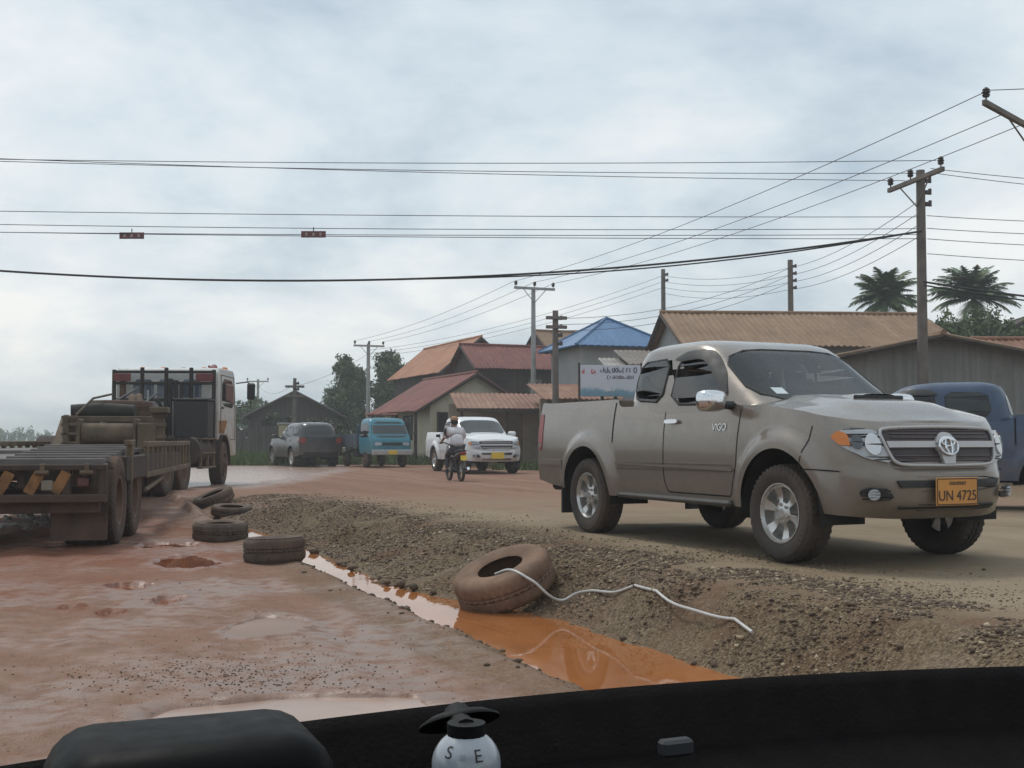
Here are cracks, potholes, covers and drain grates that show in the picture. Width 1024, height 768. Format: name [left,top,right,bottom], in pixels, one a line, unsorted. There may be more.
pothole [151,594,194,607]
pothole [147,553,232,571]
pothole [219,612,321,638]
pothole [133,540,211,549]
pothole [102,581,158,591]
